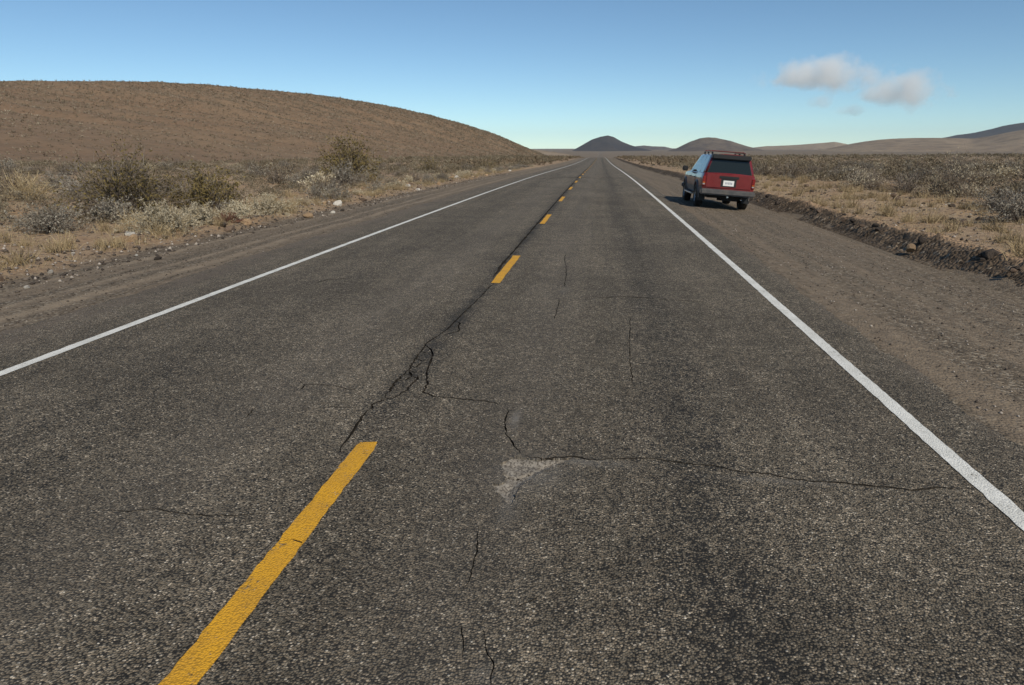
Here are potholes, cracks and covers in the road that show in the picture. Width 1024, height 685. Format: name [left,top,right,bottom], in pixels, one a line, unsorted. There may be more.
crack [103,508,267,516]
crack [462,526,479,591]
crack [482,628,495,685]
crack [297,283,969,491]
